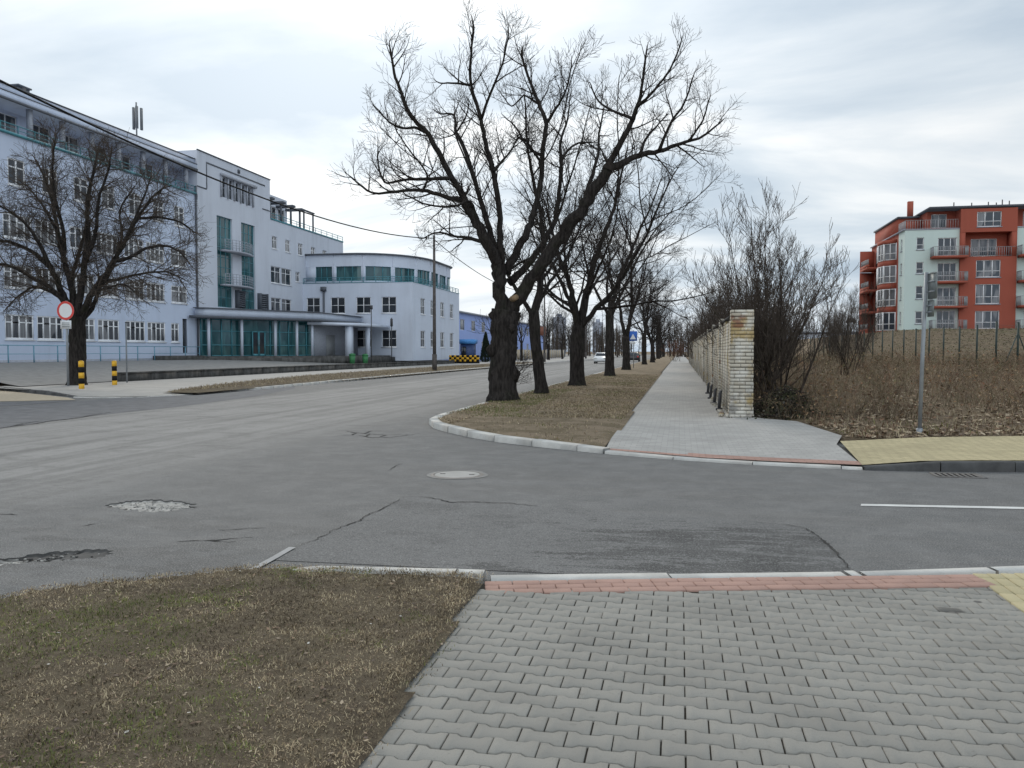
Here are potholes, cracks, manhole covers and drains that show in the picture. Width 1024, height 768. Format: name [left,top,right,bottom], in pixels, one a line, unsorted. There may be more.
crack [177,527,266,542]
crack [297,496,536,546]
pothole [0,549,114,566]
manhole cover [427,470,488,479]
